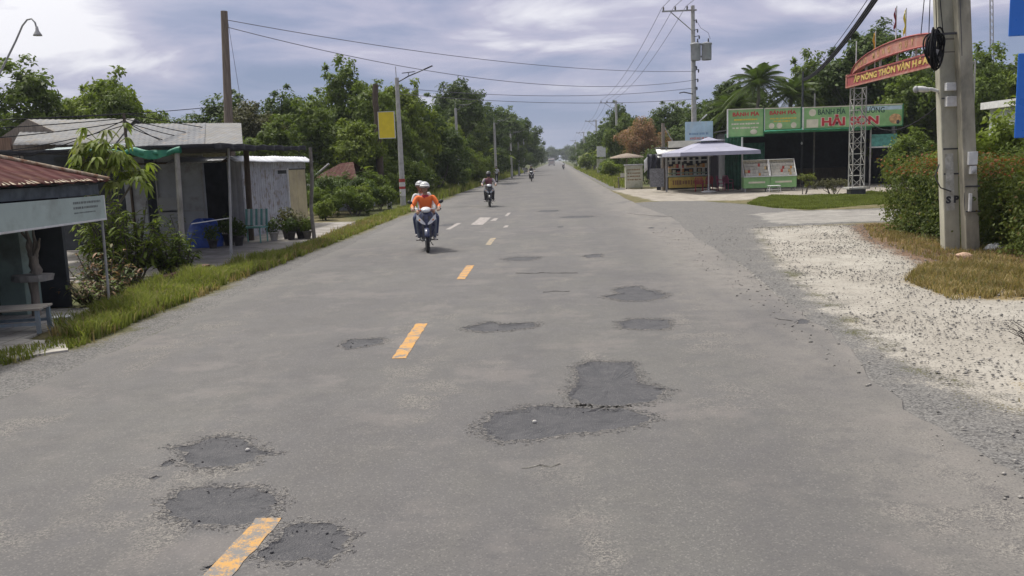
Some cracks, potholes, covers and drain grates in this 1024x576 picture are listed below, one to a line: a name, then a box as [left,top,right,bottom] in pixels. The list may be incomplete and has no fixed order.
pothole [159,431,289,474]
pothole [245,516,366,569]
pothole [143,480,296,534]
